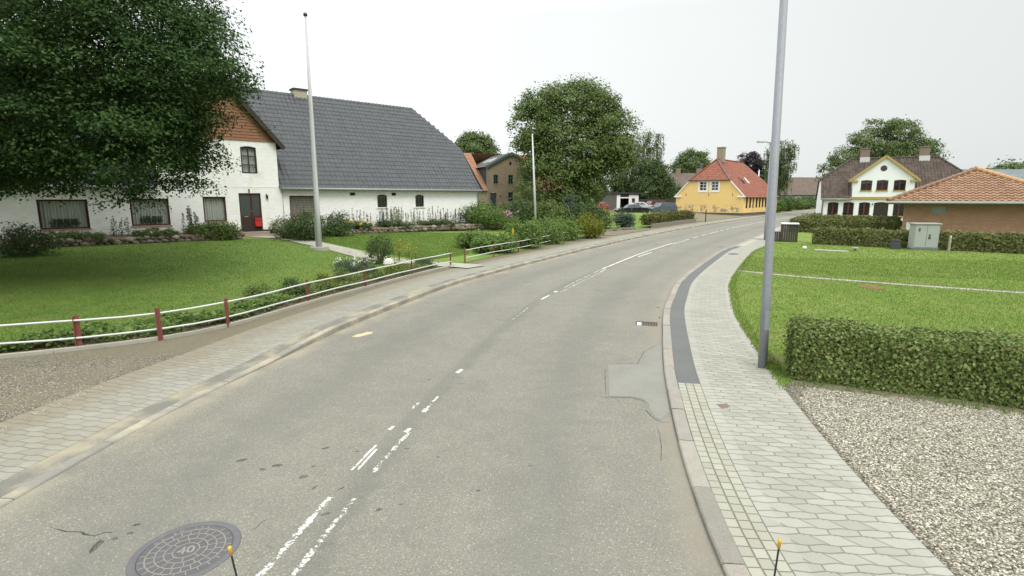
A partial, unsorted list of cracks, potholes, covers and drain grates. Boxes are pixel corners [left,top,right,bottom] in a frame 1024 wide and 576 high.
crack [50,526,114,537]
manhole cover [126,521,241,576]
